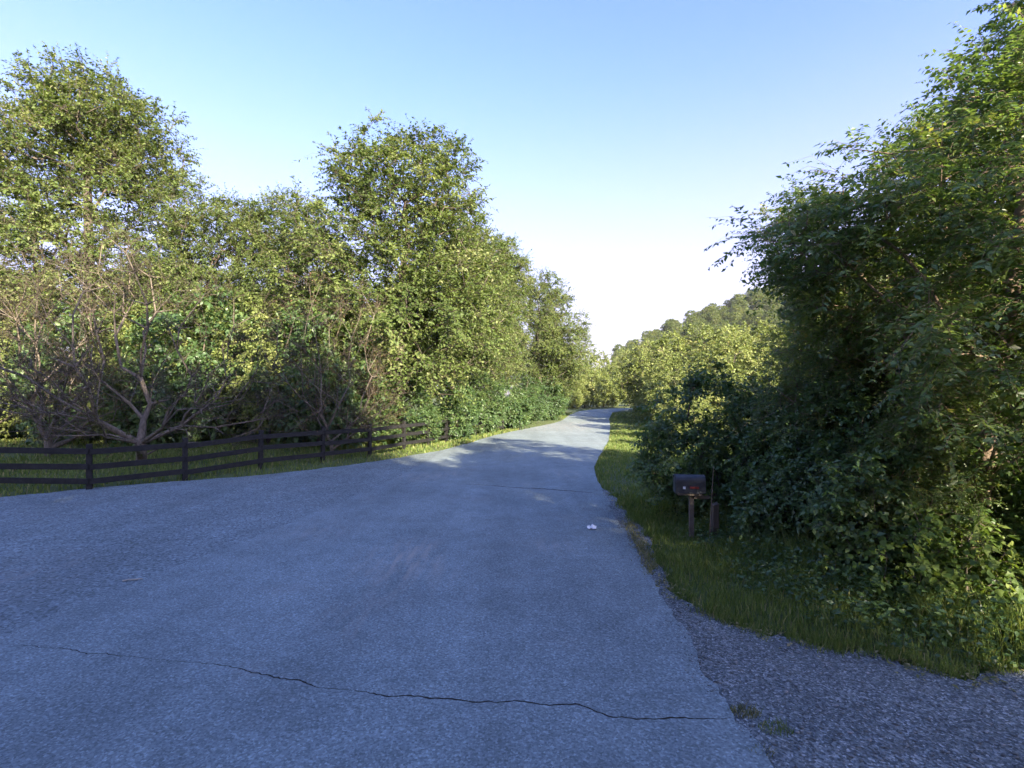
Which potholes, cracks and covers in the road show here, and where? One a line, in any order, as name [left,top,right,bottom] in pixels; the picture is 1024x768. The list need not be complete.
crack [9,644,735,720]
